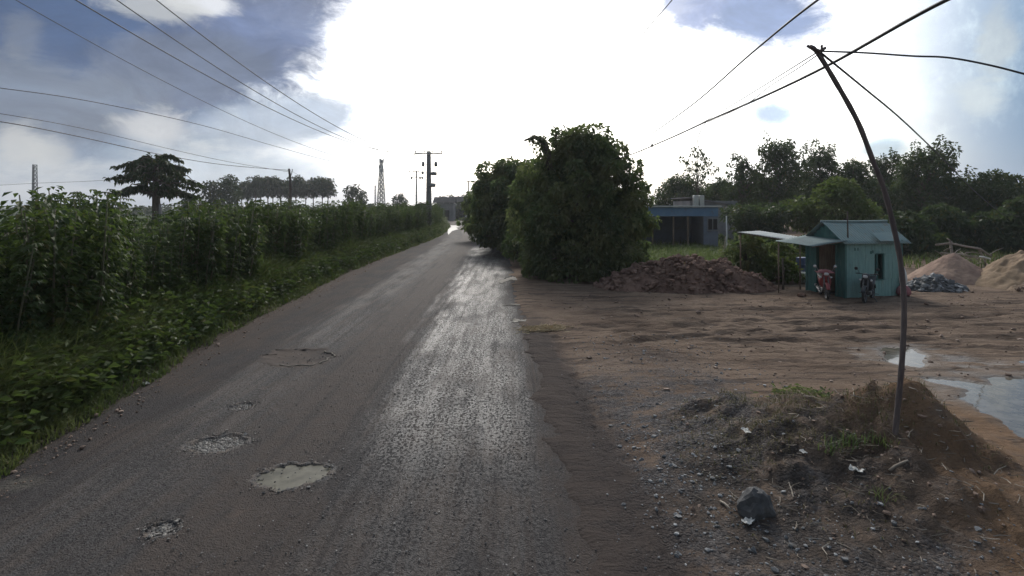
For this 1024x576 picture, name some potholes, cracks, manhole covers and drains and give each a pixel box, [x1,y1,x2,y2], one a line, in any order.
pothole [234,460,350,495]
pothole [176,429,263,457]
pothole [226,401,263,412]
pothole [256,347,351,368]
pothole [136,516,193,542]
